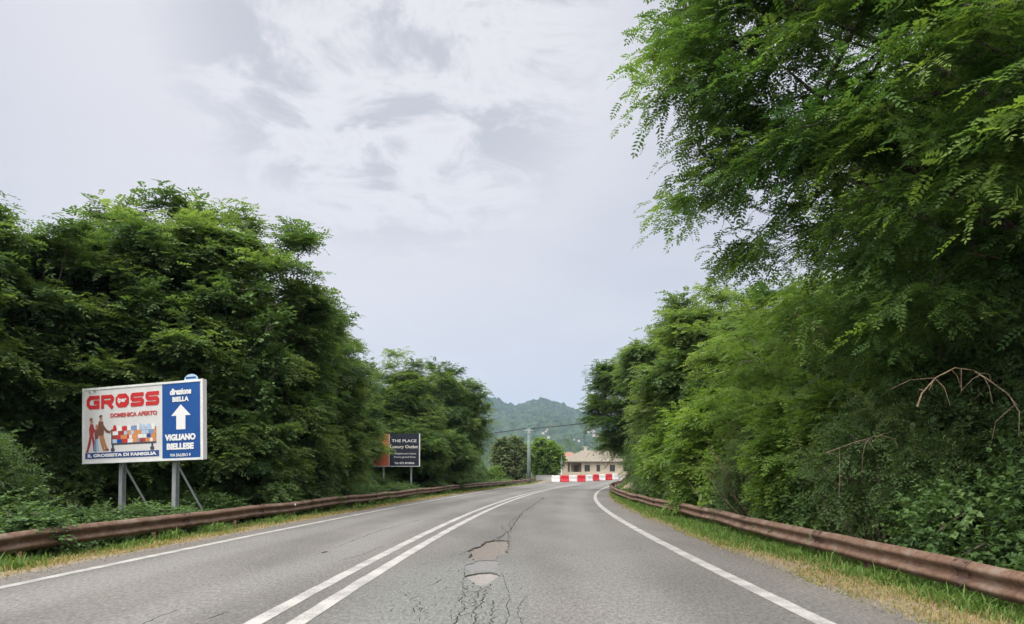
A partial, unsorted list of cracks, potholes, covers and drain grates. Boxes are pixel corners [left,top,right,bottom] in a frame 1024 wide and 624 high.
pothole [466,540,511,560]
crack [384,551,528,624]
